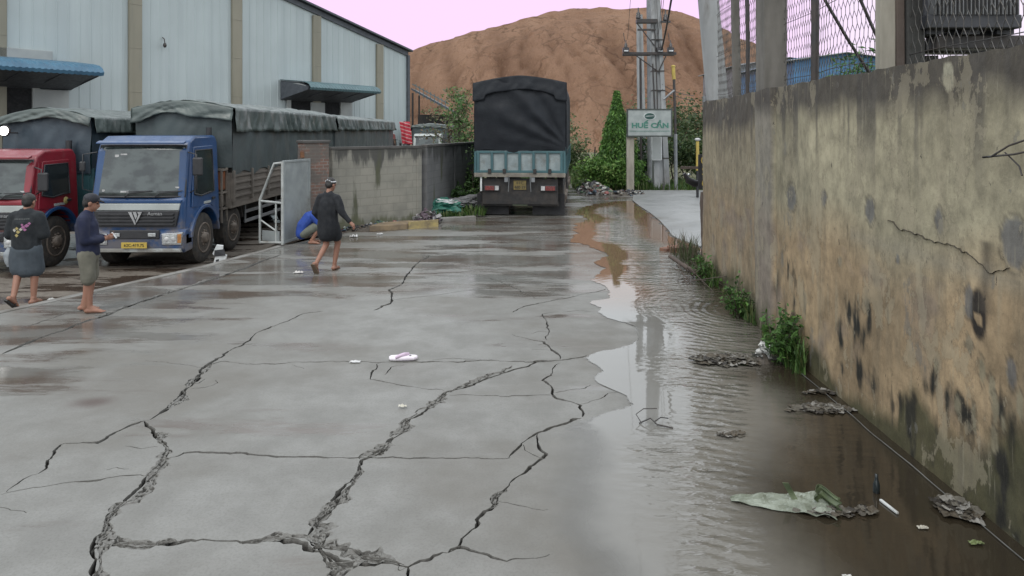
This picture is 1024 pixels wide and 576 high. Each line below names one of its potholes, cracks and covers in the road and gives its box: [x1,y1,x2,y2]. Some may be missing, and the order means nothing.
crack [2,255,616,576]
